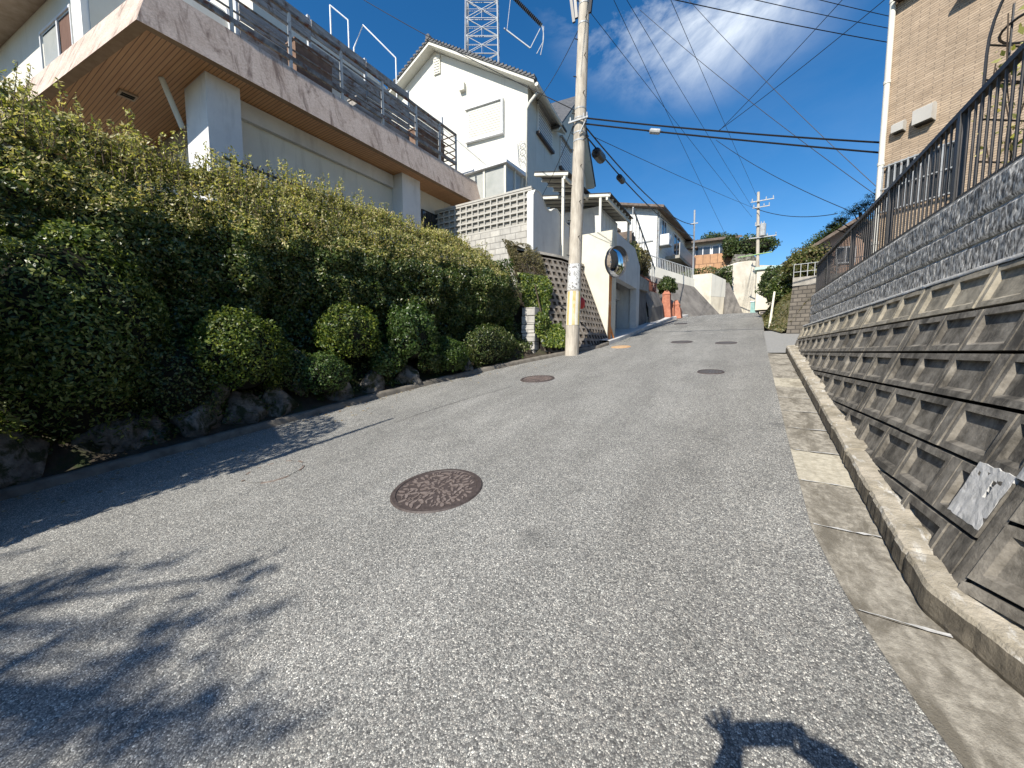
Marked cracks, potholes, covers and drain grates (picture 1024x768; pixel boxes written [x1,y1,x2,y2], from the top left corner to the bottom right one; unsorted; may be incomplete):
manhole cover [520,375,555,383]
manhole cover [390,469,483,514]
